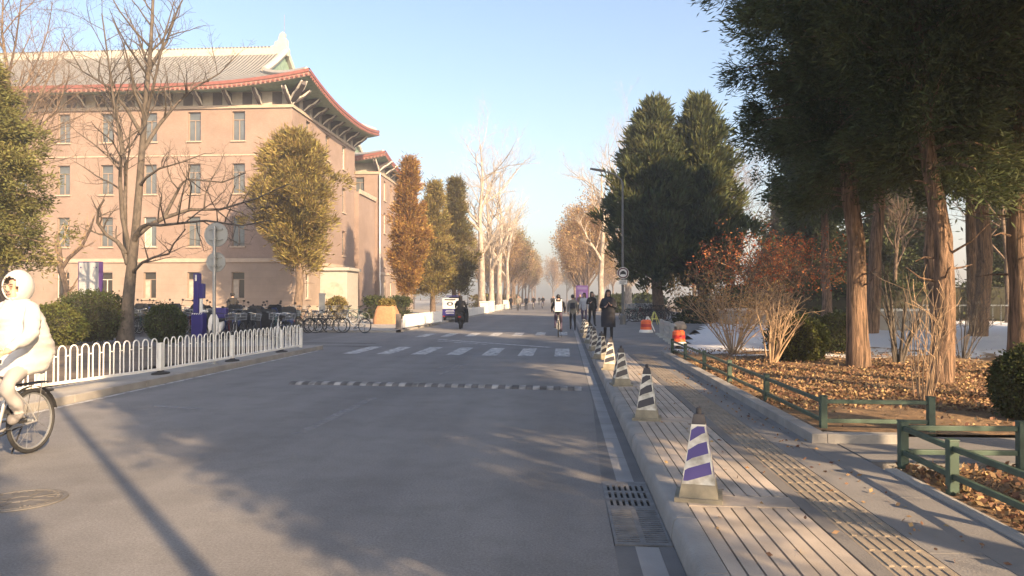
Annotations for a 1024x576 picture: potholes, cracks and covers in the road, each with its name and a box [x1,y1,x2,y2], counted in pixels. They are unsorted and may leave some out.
manhole cover [0,489,69,512]
drain grate [602,481,657,510]
drain grate [608,508,673,547]
